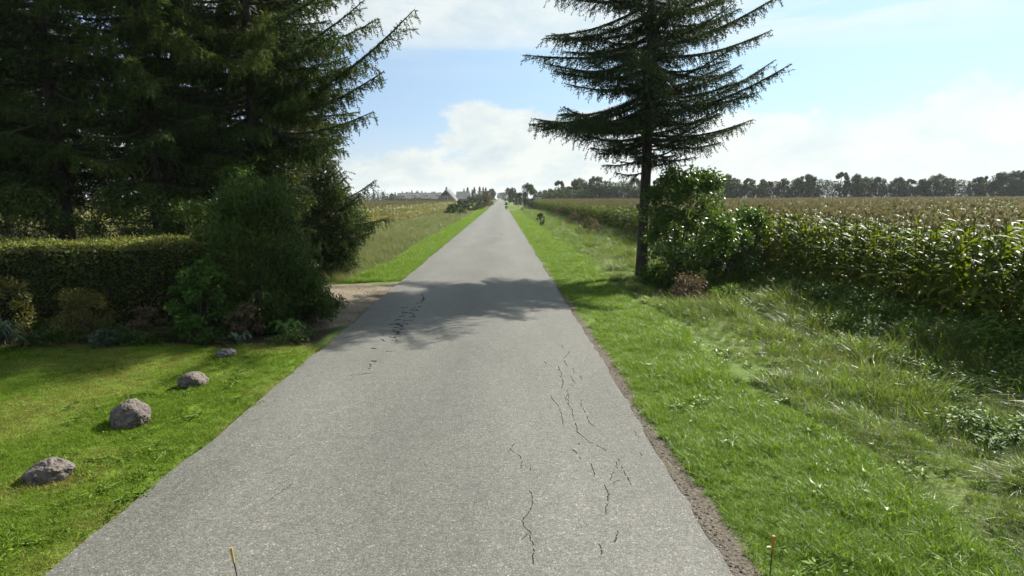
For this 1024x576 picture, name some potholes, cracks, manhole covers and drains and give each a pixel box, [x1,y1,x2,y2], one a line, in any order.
crack [351,294,426,376]
crack [522,491,535,564]
crack [544,345,642,555]
